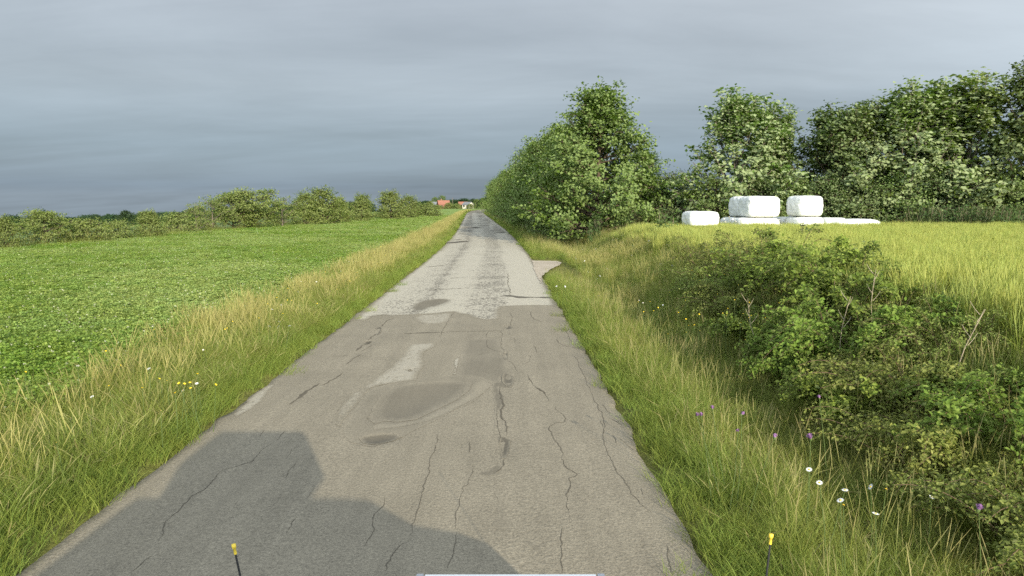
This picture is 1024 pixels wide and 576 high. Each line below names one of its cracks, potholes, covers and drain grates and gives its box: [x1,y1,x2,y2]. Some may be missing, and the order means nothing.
crack [161,431,297,536]
pothole [359,433,401,444]
crack [556,326,652,516]
crack [482,273,577,510]
crack [364,498,403,570]
crack [447,470,473,567]
pothole [408,298,454,311]
